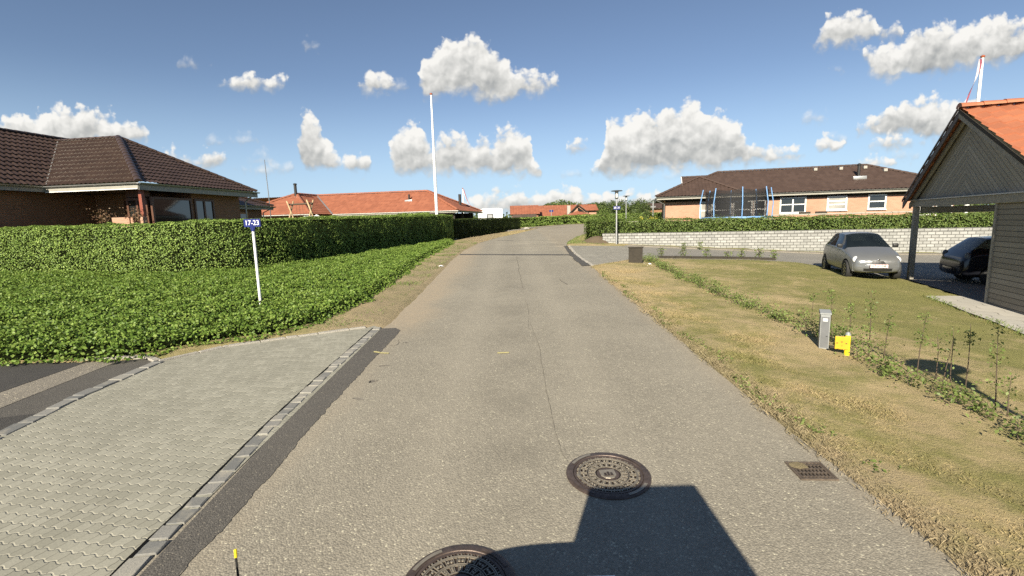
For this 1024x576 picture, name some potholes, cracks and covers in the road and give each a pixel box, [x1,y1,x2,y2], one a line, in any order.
manhole cover [566,452,652,500]
drain grate [785,461,839,481]
manhole cover [406,544,516,576]
crack [516,256,568,461]
